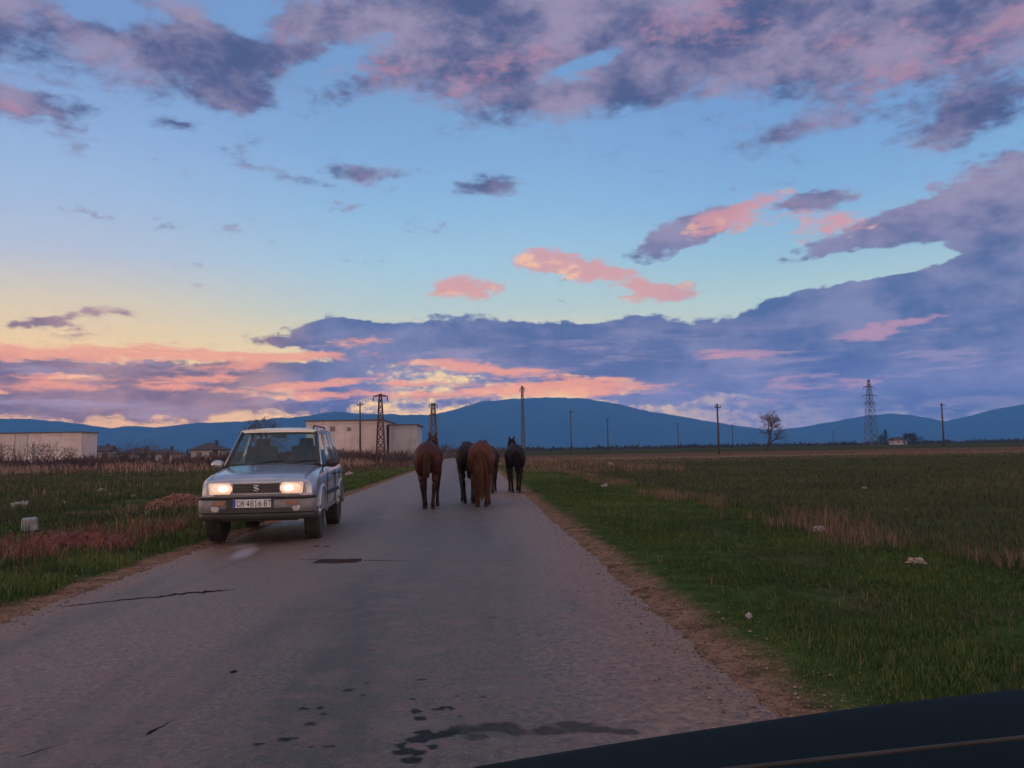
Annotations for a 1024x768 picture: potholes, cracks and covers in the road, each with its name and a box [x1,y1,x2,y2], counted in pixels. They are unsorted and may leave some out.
crack [62,589,234,607]
